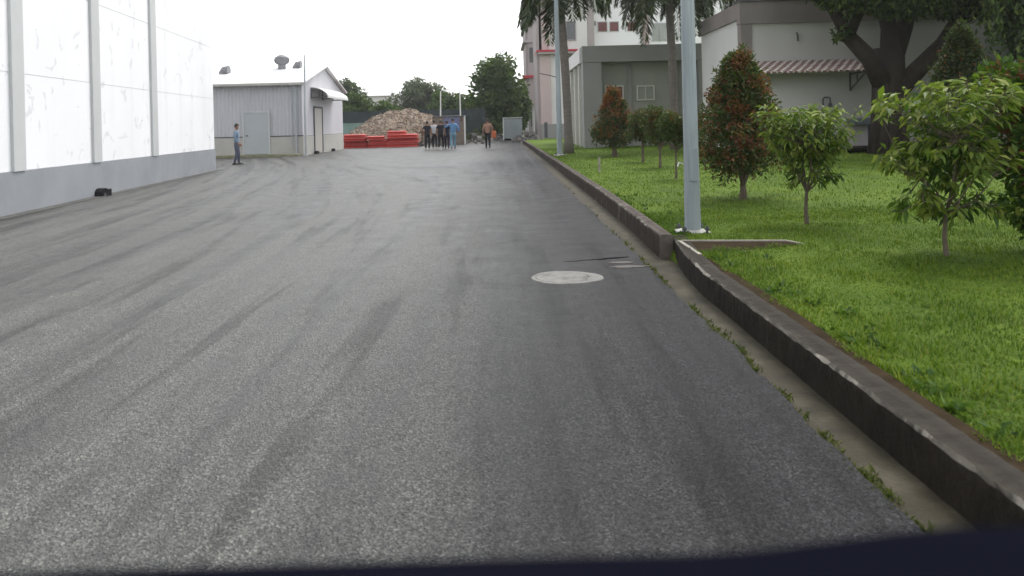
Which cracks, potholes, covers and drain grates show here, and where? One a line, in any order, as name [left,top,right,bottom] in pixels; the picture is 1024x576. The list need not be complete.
manhole cover [531,271,604,284]
